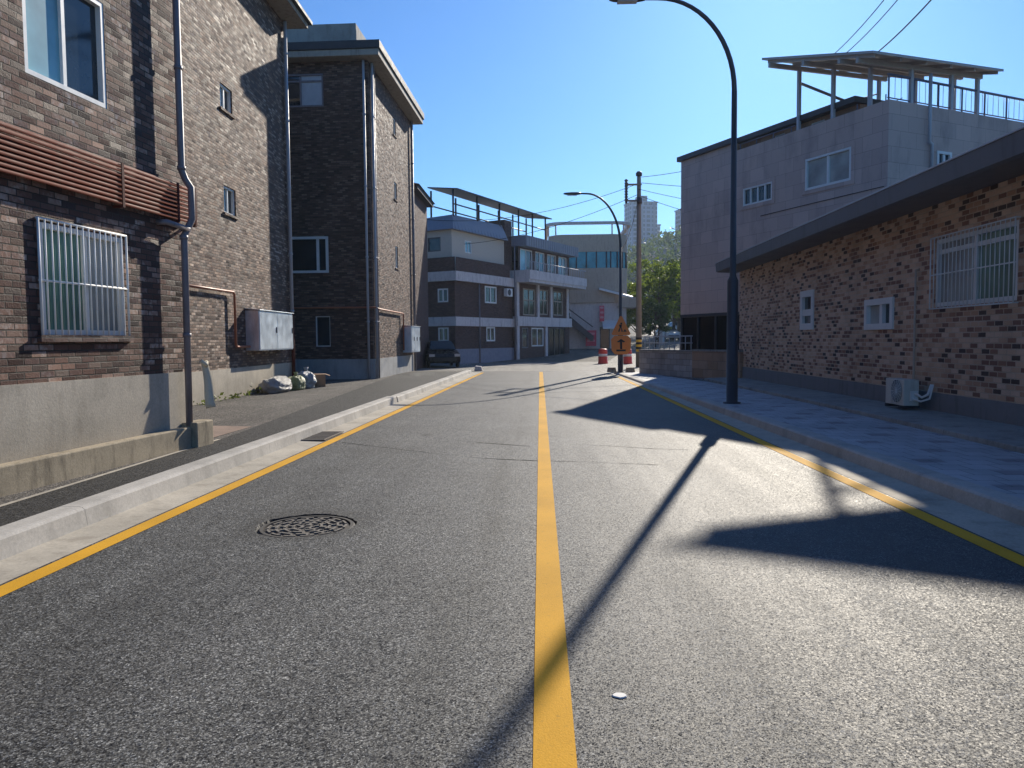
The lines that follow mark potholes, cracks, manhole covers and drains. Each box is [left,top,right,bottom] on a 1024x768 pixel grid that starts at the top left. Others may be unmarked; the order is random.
drain grate [301,431,344,441]
manhole cover [257,516,356,538]
